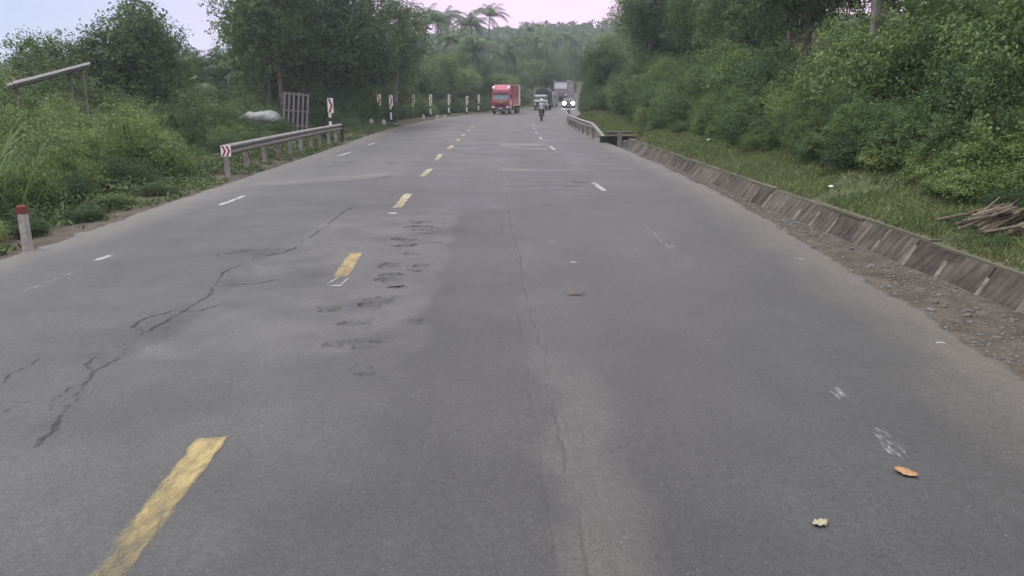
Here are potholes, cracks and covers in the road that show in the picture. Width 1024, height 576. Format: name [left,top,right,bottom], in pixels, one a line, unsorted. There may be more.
pothole [377,282,416,293]
pothole [364,270,418,287]
pothole [348,294,416,313]
pothole [299,336,413,353]
crack [0,175,398,458]
pothole [392,224,453,232]
